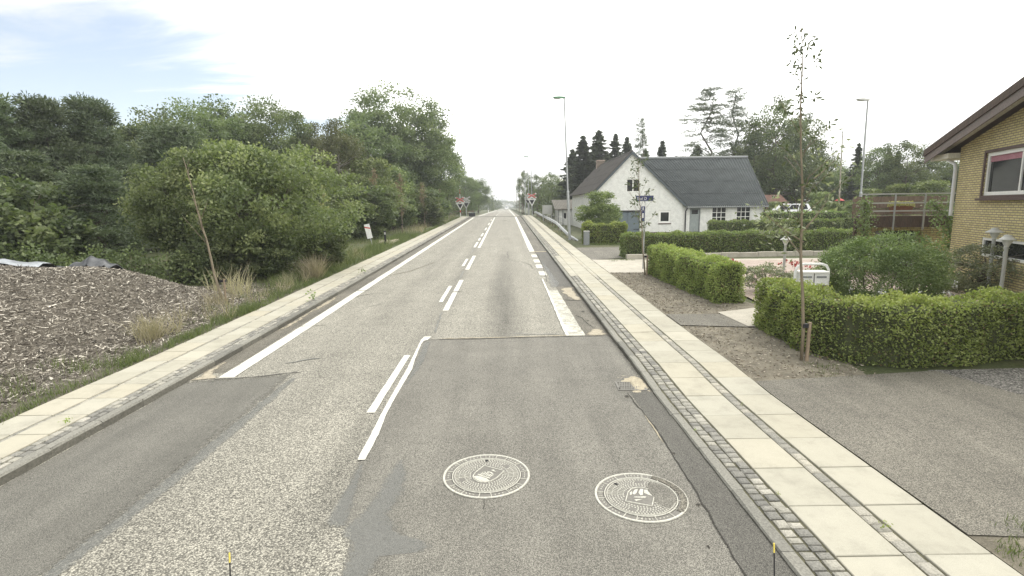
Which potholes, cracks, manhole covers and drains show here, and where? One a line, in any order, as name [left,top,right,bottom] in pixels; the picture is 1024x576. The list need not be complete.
drain grate [615,382,648,391]
manhole cover [443,454,530,499]
manhole cover [595,473,689,523]
